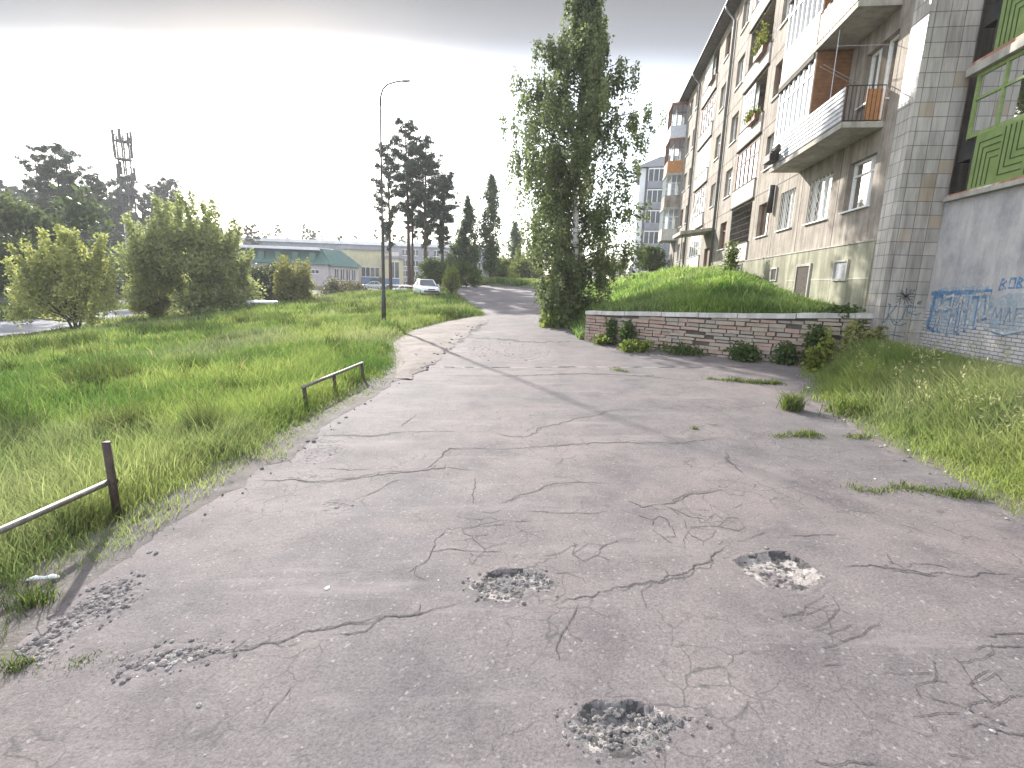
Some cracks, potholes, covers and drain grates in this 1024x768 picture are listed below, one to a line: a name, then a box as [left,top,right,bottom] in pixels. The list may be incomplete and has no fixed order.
pothole [723,546,831,597]
crack [139,602,460,662]
pothole [461,566,559,605]
crack [884,632,1024,735]
pothole [0,571,150,676]
crack [770,594,885,667]
pothole [103,638,237,684]
crack [277,408,764,655]
pothole [554,697,711,763]
